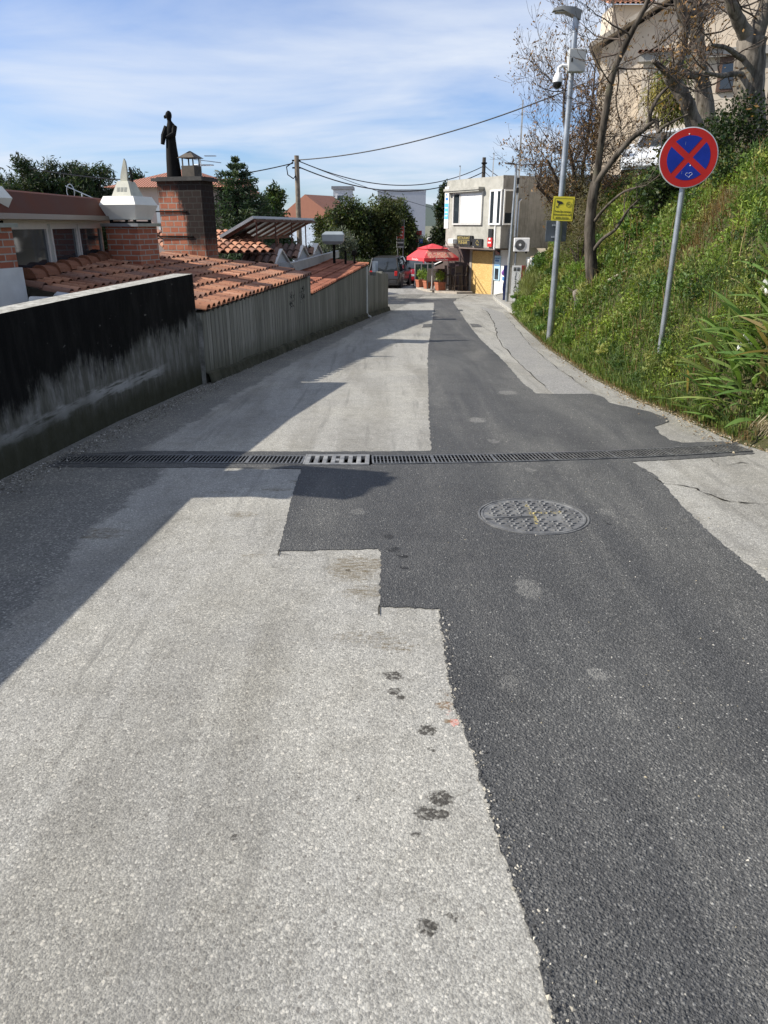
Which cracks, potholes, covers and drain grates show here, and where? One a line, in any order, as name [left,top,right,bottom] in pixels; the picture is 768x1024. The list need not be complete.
drain grate [245,455,305,464]
drain grate [606,448,675,459]
drain grate [53,454,132,464]
drain grate [698,444,753,454]
drain grate [491,452,558,463]
drain grate [185,454,252,464]
crack [457,295,587,389]
drain grate [432,454,497,464]
drain grate [123,454,193,463]
drain grate [661,446,716,456]
drain grate [372,455,435,464]
manhole cover [478,498,590,535]
